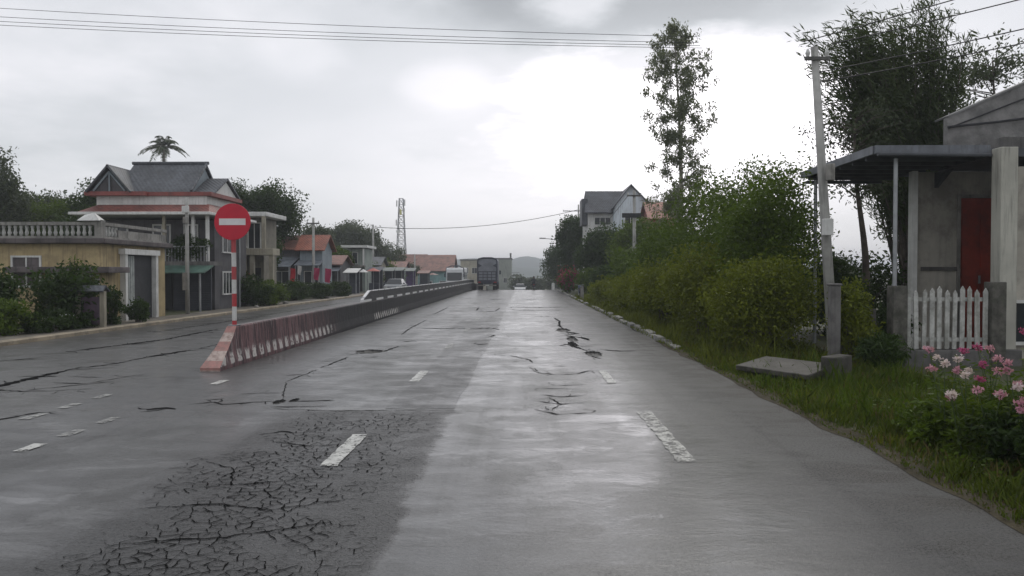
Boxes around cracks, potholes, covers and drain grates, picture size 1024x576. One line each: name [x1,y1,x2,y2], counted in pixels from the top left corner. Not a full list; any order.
crack [36,410,438,576]
crack [0,374,143,394]
crack [137,299,620,414]
